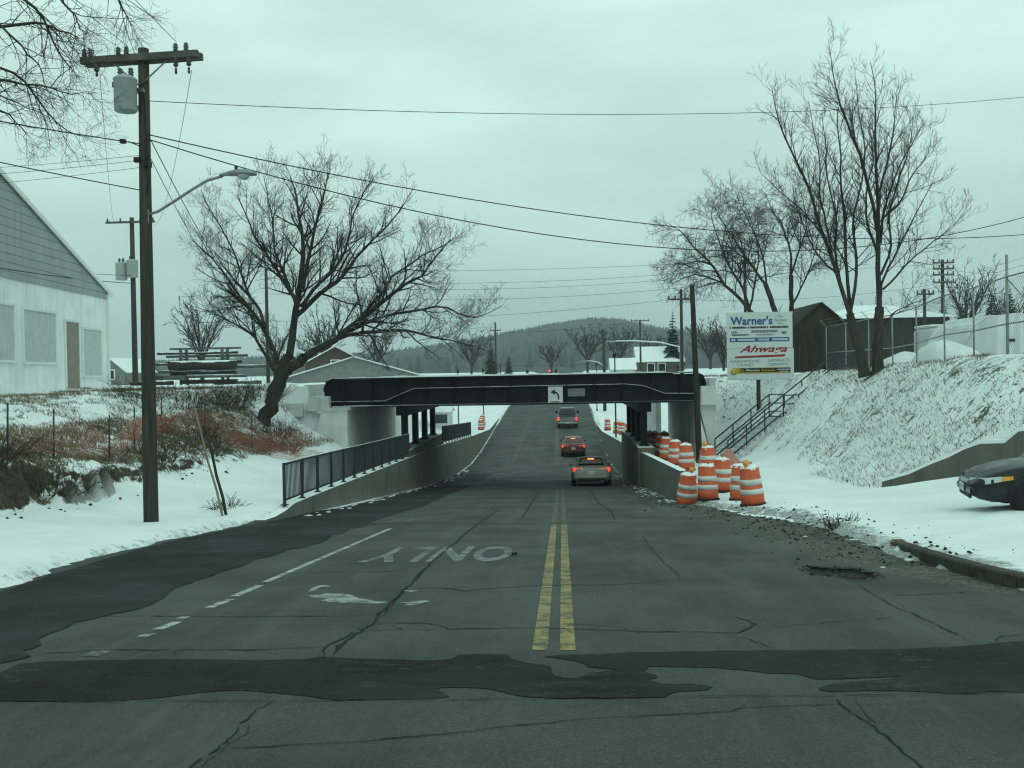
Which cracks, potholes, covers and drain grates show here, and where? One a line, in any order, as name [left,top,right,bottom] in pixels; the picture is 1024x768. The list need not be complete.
crack [188,698,924,768]
crack [778,584,978,639]
pothole [797,565,886,582]
